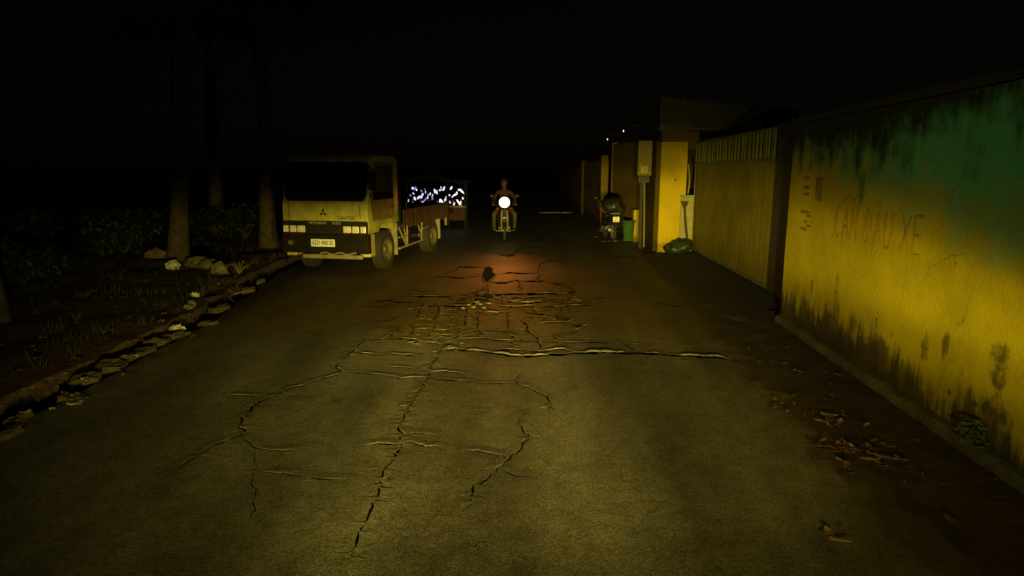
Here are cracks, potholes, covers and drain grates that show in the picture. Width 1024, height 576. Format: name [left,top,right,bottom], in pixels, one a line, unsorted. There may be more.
pothole [480,265,497,285]
crack [155,221,738,570]
